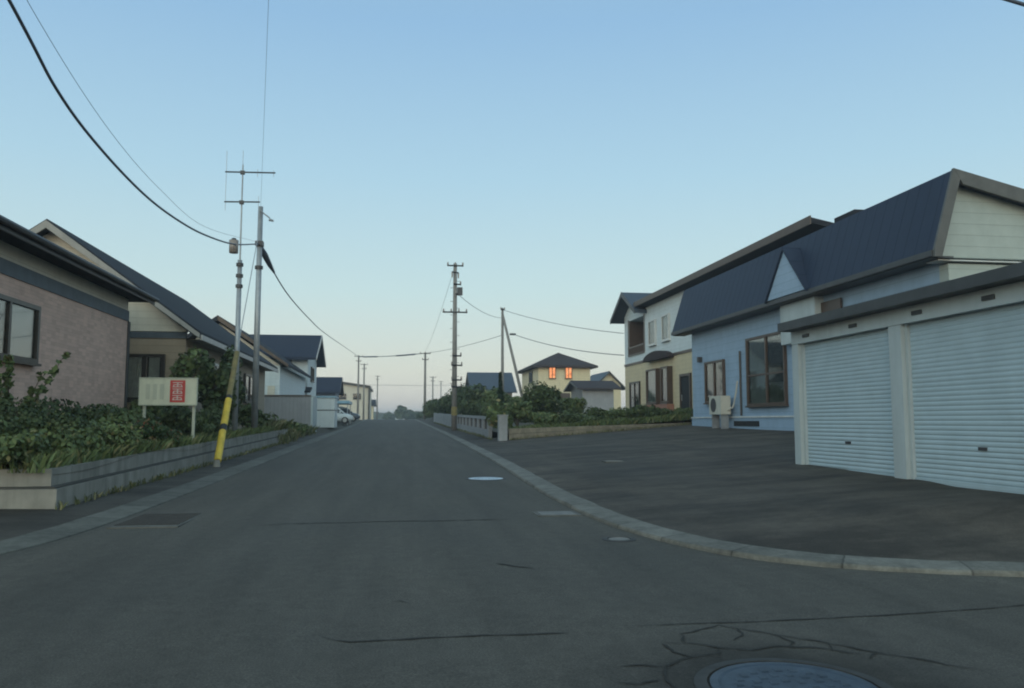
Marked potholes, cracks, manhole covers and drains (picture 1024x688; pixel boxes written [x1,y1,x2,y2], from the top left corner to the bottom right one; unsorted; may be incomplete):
crack [618,604,1024,688]
drain grate [106,513,202,529]
manhole cover [694,658,893,688]
